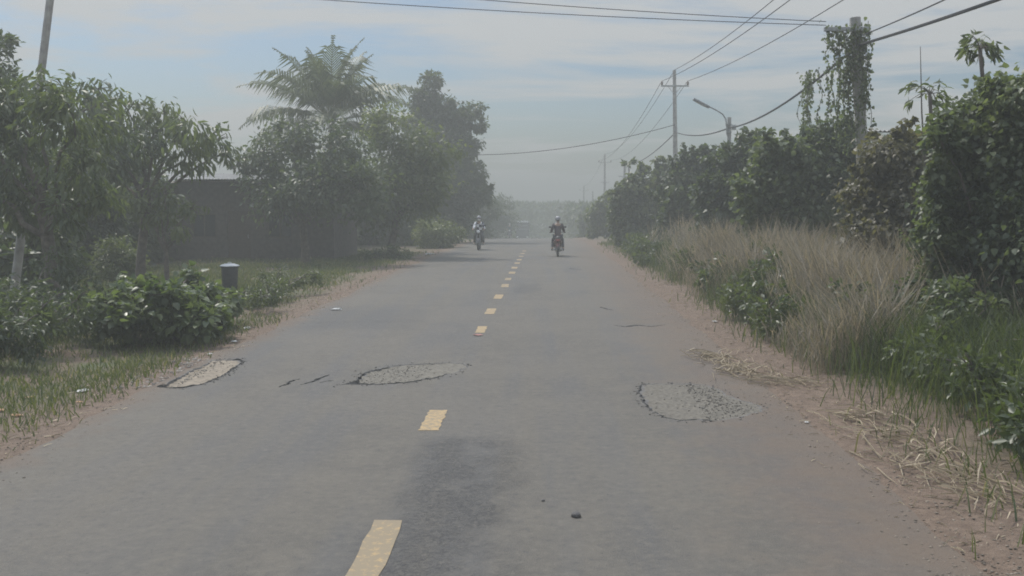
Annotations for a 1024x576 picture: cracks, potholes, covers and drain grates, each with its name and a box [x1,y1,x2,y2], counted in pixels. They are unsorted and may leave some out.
pothole [333,362,472,387]
pothole [630,382,771,423]
crack [279,375,333,387]
